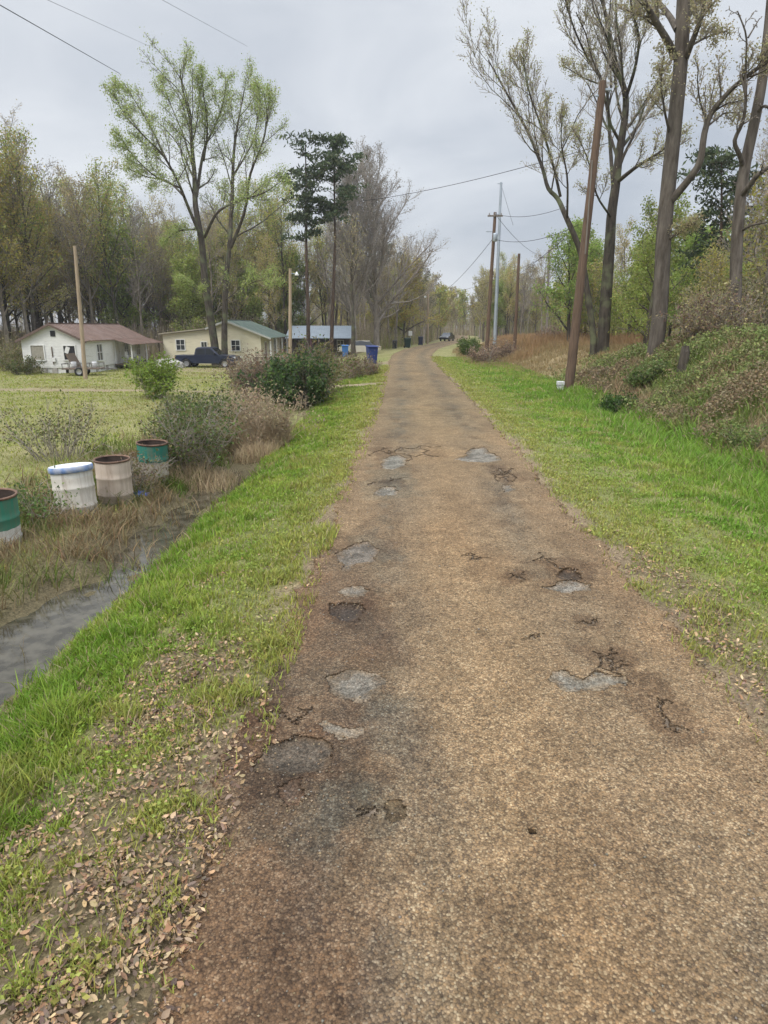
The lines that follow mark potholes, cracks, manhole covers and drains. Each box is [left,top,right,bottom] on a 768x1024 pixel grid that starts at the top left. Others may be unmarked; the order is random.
pothole [555,567,582,581]
pothole [329,602,364,623]
crack [592,647,629,677]
pothole [384,799,407,822]
crack [657,698,691,733]
crack [368,446,438,461]
pothole [253,735,334,778]
